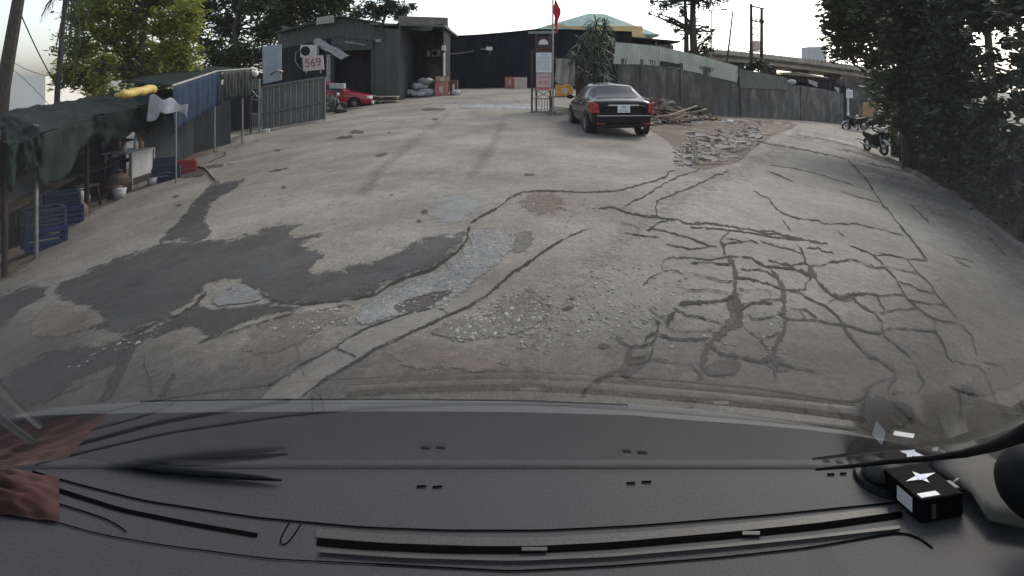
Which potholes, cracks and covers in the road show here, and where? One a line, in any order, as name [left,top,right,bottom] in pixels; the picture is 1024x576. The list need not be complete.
crack [122,135,1007,397]
